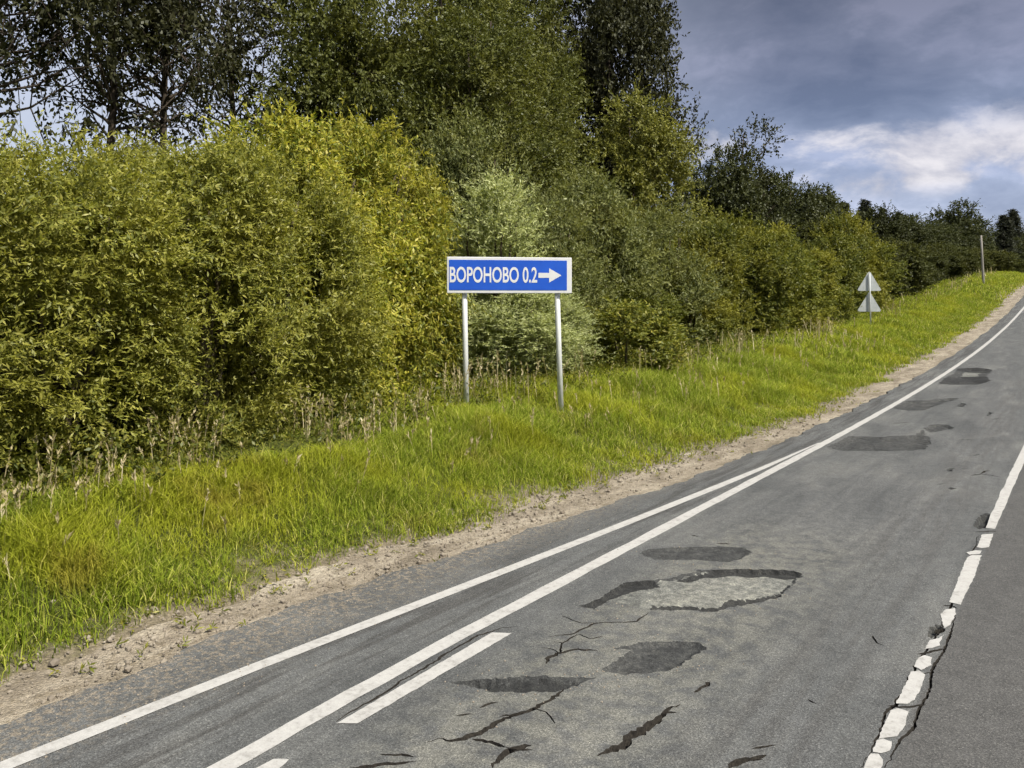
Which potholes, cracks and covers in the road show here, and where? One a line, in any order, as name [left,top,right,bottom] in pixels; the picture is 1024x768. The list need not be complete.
pothole [601,641,707,675]
pothole [451,675,596,693]
crack [541,613,648,664]
crack [351,689,563,768]
pothole [579,569,803,612]
crack [597,682,710,756]
pothole [973,513,990,529]
